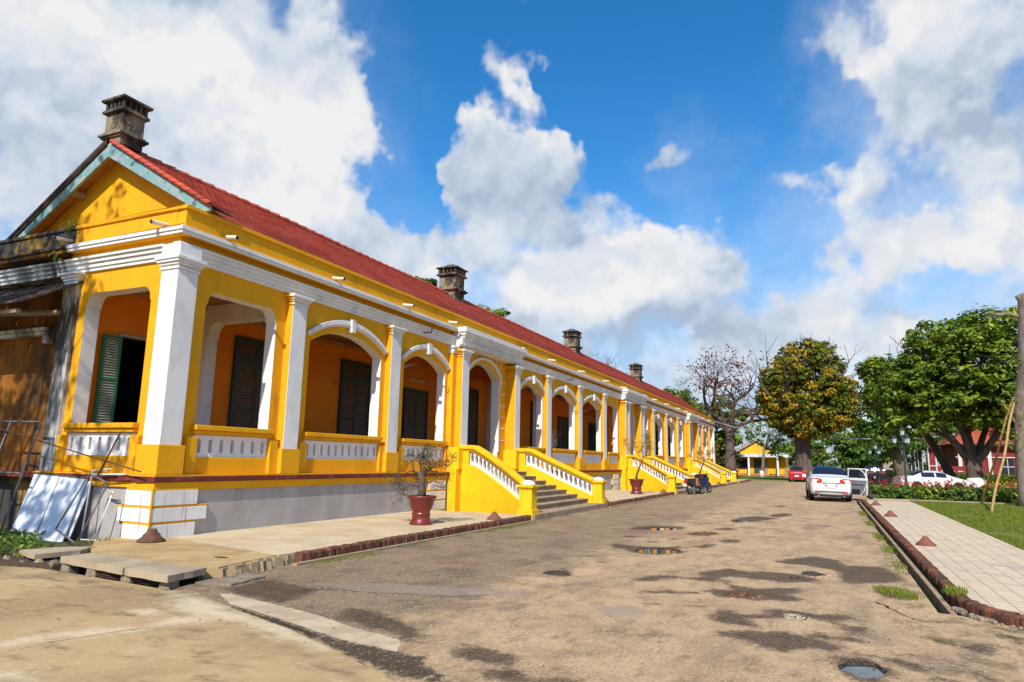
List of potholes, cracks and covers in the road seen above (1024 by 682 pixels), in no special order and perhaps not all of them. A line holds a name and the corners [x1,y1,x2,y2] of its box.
pothole [828,657,897,681]
pothole [720,589,767,601]
crack [876,602,956,624]
